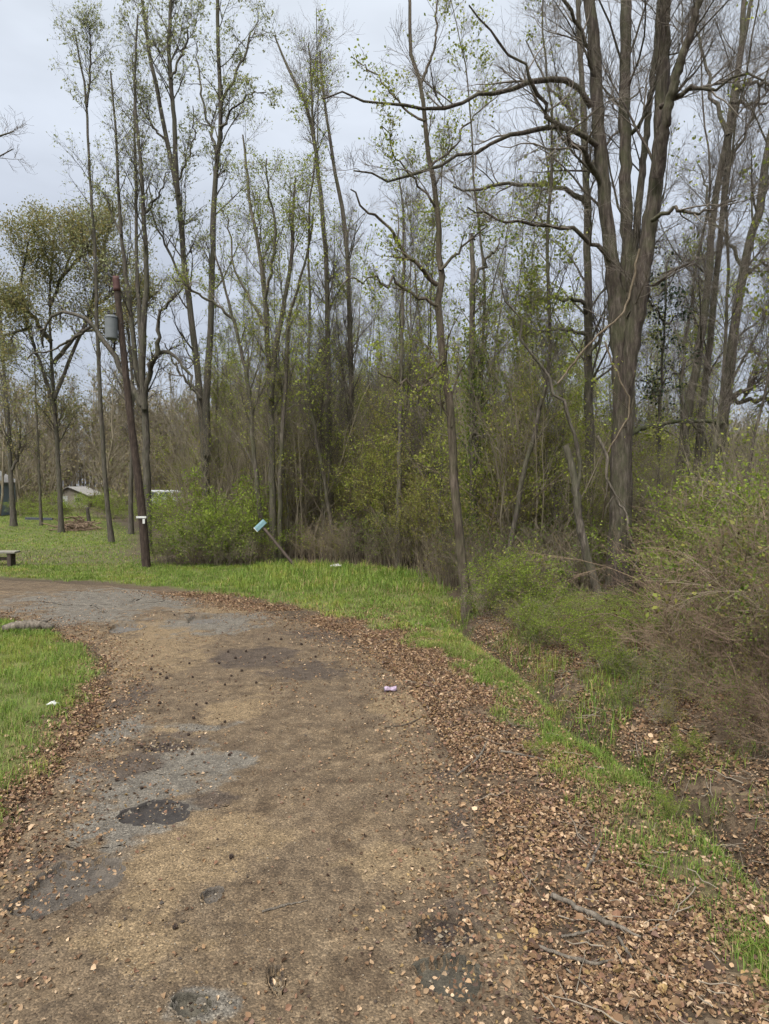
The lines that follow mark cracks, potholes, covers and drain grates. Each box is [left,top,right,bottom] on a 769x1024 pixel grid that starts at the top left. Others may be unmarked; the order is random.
pothole [409,950,485,1007]
pothole [198,885,225,906]
pothole [168,991,214,1021]
pothole [410,907,489,950]
pothole [112,799,193,828]
